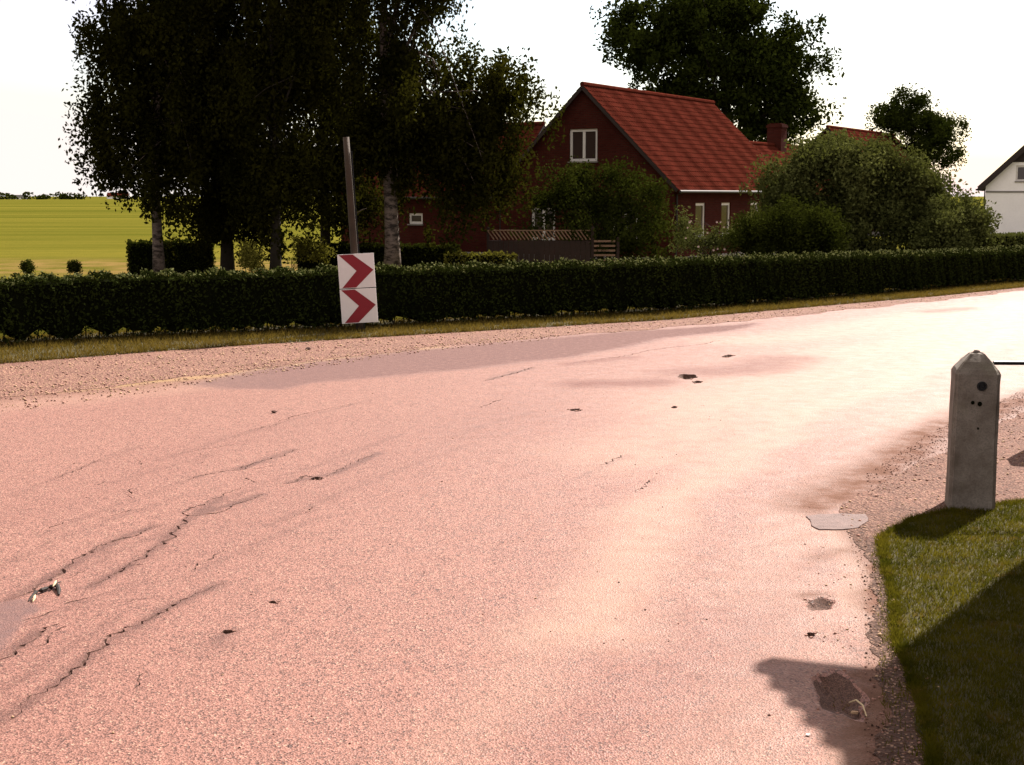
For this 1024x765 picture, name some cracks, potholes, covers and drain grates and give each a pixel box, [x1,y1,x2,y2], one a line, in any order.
pothole [810,668,874,722]
crack [283,454,374,484]
crack [0,450,293,722]
pothole [803,596,836,611]
